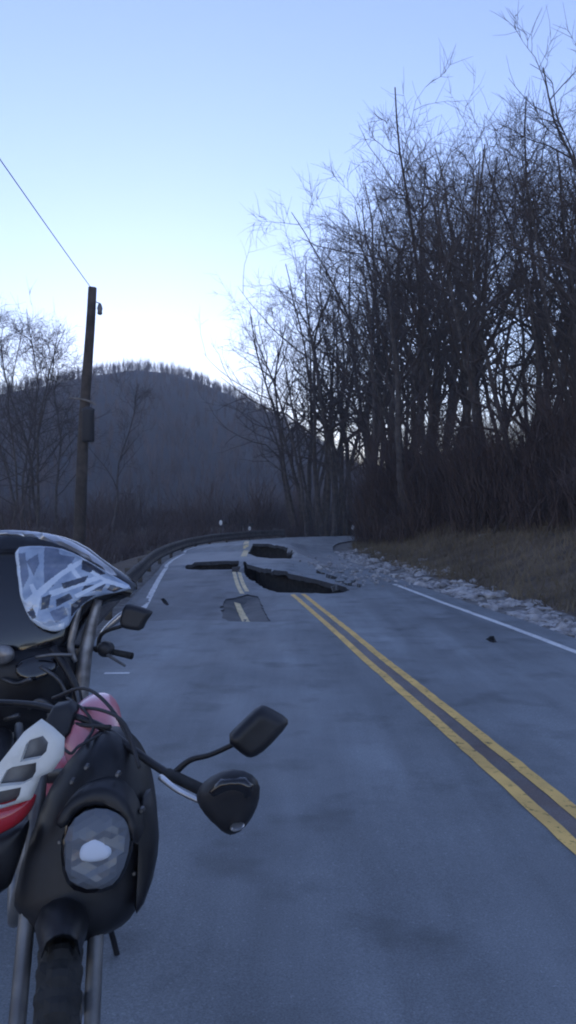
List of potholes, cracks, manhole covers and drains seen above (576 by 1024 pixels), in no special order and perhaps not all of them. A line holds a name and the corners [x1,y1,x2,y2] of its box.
pothole [220,594,270,622]
